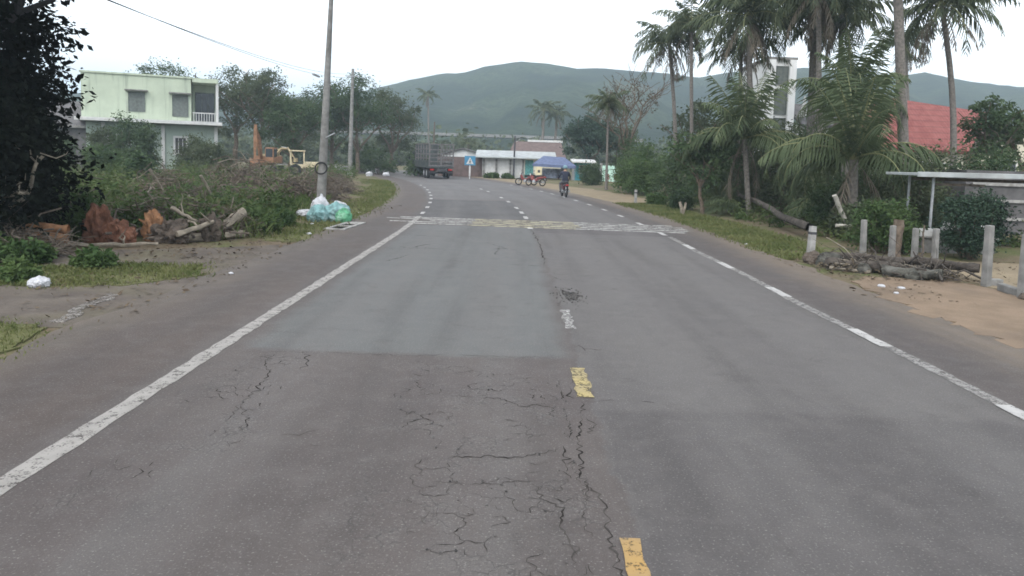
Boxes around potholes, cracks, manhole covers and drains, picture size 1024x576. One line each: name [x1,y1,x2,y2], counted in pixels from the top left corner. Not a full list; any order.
drain grate [324,222,366,230]
crack [394,365,590,576]
crack [86,351,541,478]
pothole [549,286,587,303]
